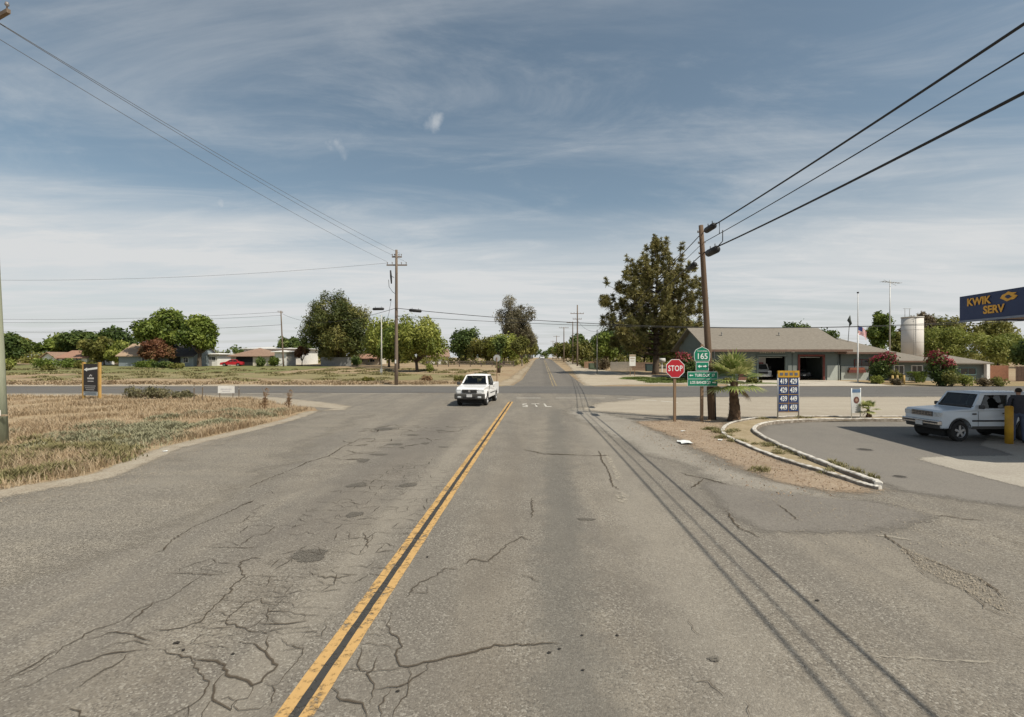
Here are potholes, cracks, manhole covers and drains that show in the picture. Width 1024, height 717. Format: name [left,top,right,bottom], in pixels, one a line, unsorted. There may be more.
crack [316,536,554,717]
pothole [900,545,1012,612]
crack [599,451,627,502]
crack [0,425,466,717]
